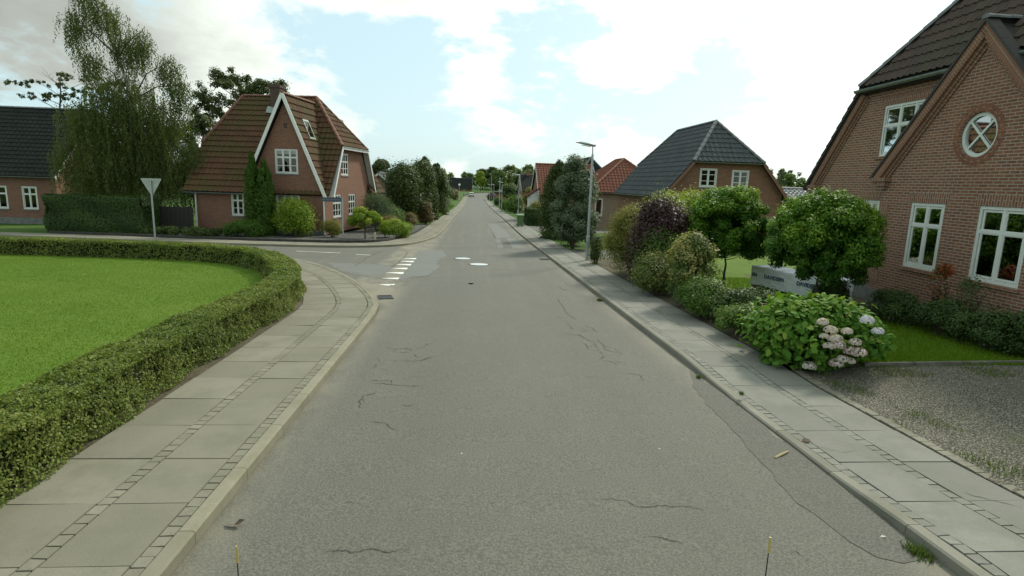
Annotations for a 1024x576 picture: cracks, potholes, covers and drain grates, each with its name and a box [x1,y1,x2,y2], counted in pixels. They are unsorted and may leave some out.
crack [558,287,643,381]
crack [358,343,435,431]
